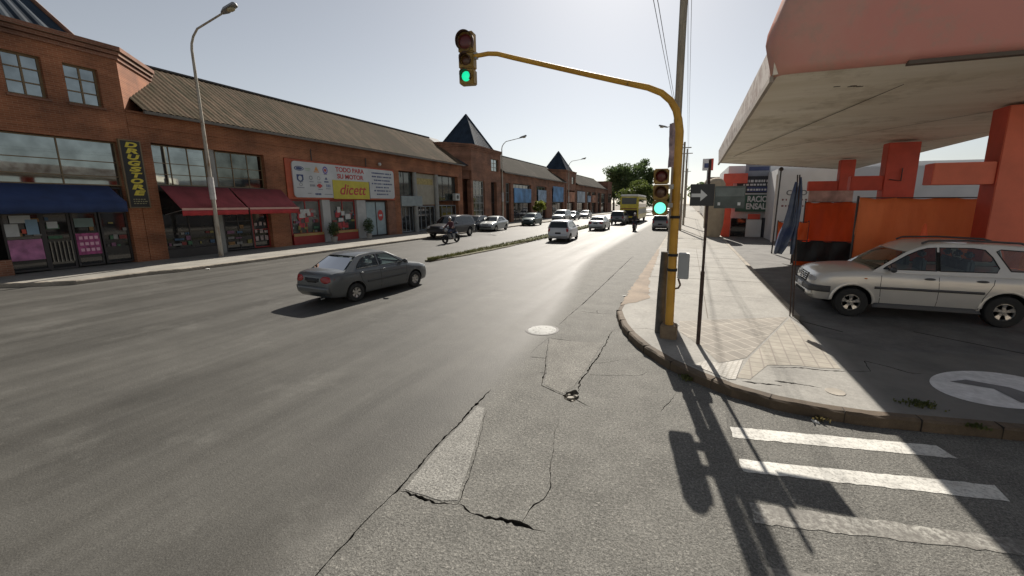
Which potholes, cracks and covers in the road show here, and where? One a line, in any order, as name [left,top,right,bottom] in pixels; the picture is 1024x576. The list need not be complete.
crack [315,391,559,576]
crack [532,332,645,404]
pothole [563,390,579,402]
manhole cover [525,325,559,336]
